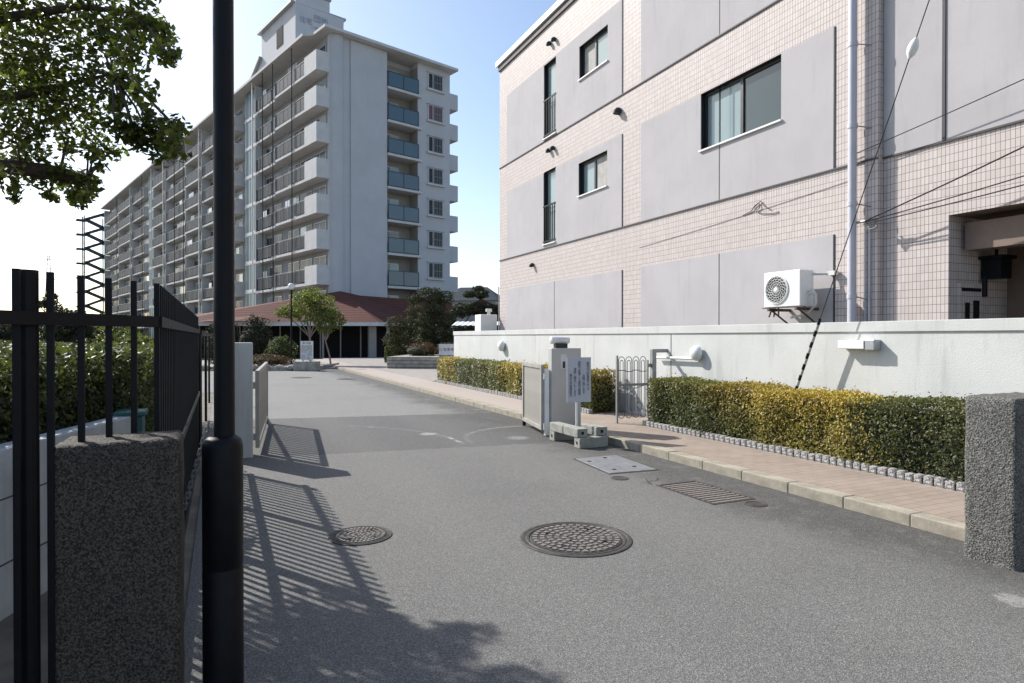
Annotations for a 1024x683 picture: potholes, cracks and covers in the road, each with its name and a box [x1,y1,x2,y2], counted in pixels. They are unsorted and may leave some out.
manhole cover [328,526,392,546]
manhole cover [520,522,633,558]
drain grate [656,480,755,505]
